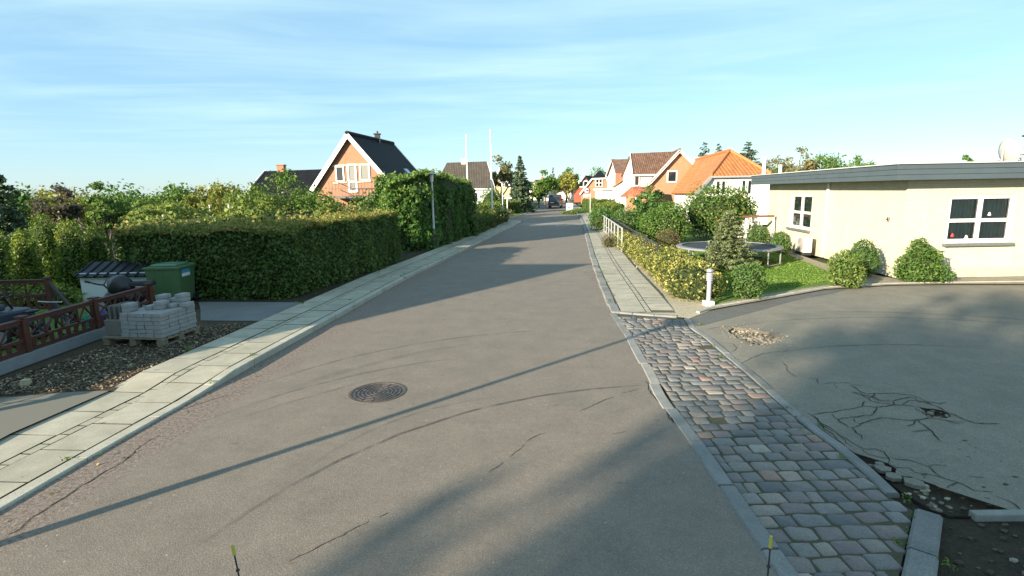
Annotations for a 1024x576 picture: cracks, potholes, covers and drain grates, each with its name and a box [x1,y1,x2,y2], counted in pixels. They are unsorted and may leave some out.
pothole [920,407,951,419]
crack [8,438,153,535]
pothole [729,328,780,345]
crack [288,382,674,562]
manhole cover [348,382,406,403]
crack [715,323,1020,509]
pothole [854,453,1008,519]
